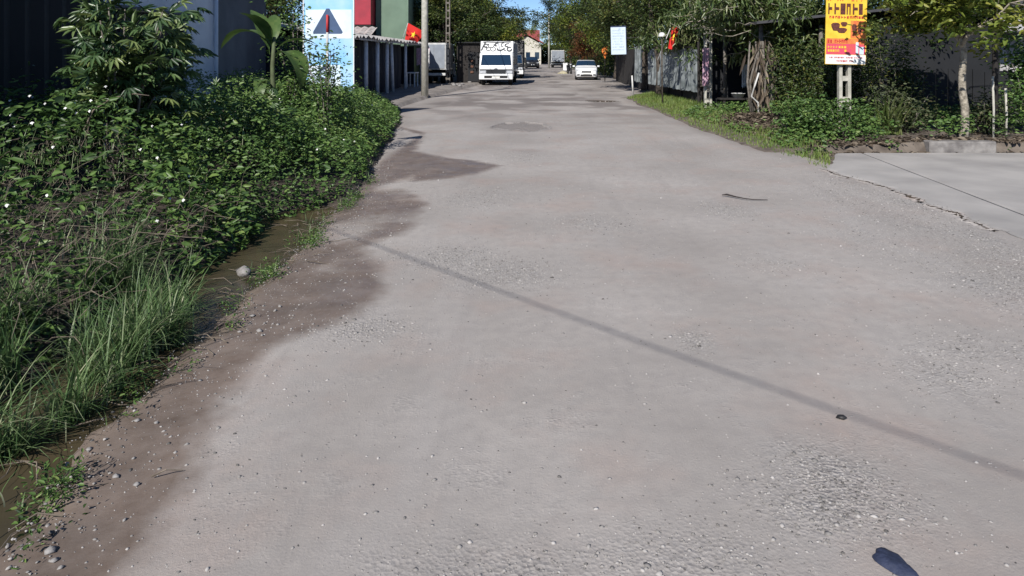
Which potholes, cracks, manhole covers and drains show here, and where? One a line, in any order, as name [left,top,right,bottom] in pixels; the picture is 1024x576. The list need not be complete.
crack [816,169,997,232]
